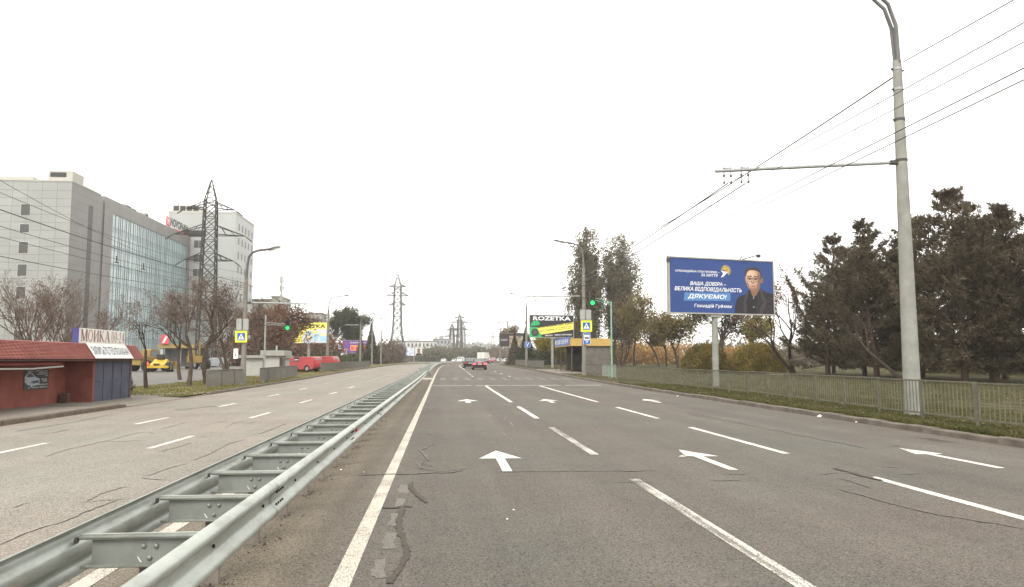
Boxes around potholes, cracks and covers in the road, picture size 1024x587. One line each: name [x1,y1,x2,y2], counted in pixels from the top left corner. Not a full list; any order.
crack [824,472,1022,528]
crack [0,406,286,544]
